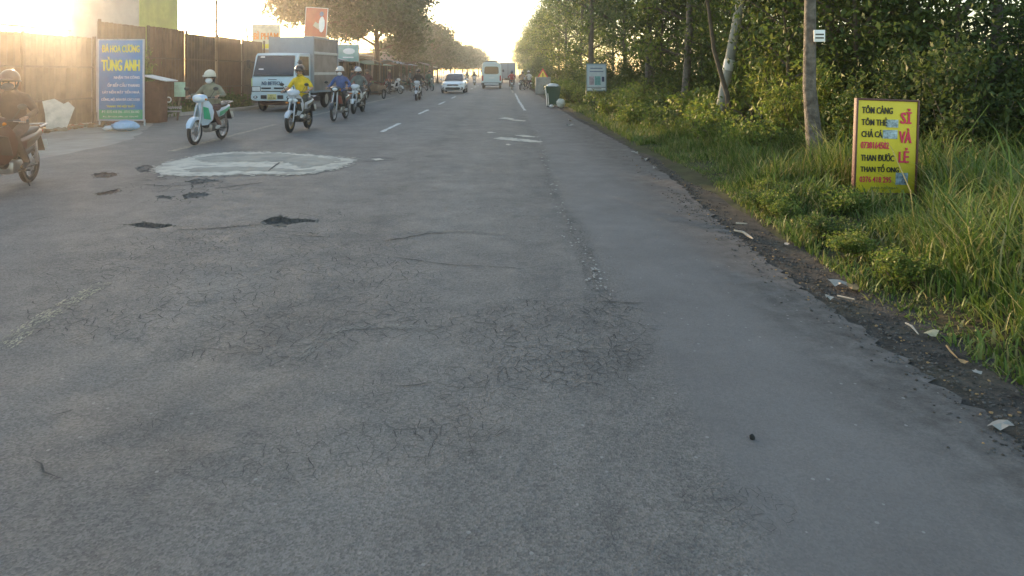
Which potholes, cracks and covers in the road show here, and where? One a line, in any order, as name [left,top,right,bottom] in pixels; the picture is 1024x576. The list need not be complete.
crack [33,130,662,490]
pothole [261,215,318,228]
pothole [123,221,176,229]
